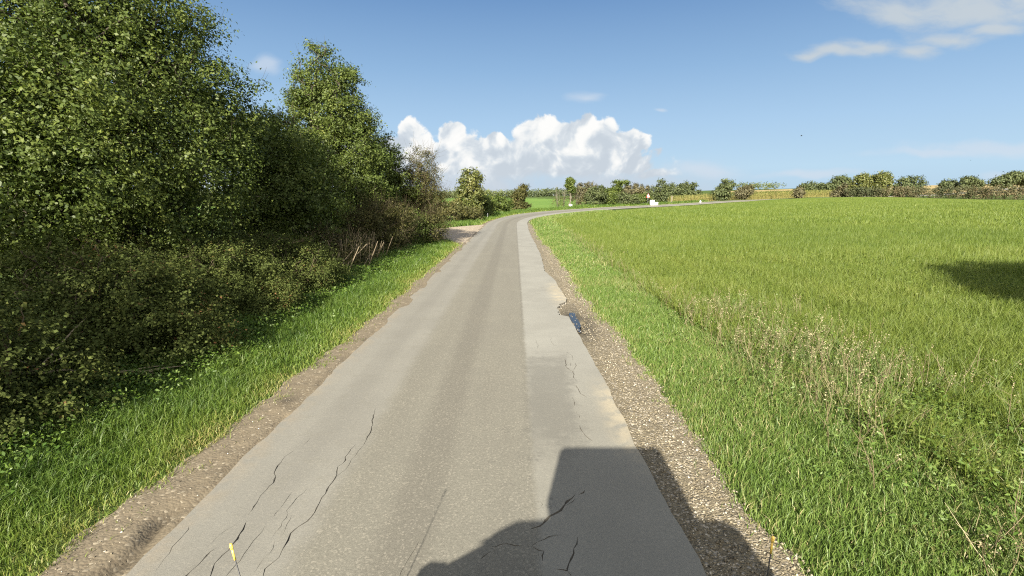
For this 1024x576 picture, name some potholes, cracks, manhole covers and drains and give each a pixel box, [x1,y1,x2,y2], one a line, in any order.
crack [565,353,591,440]
crack [481,490,585,575]
crack [157,411,375,576]
